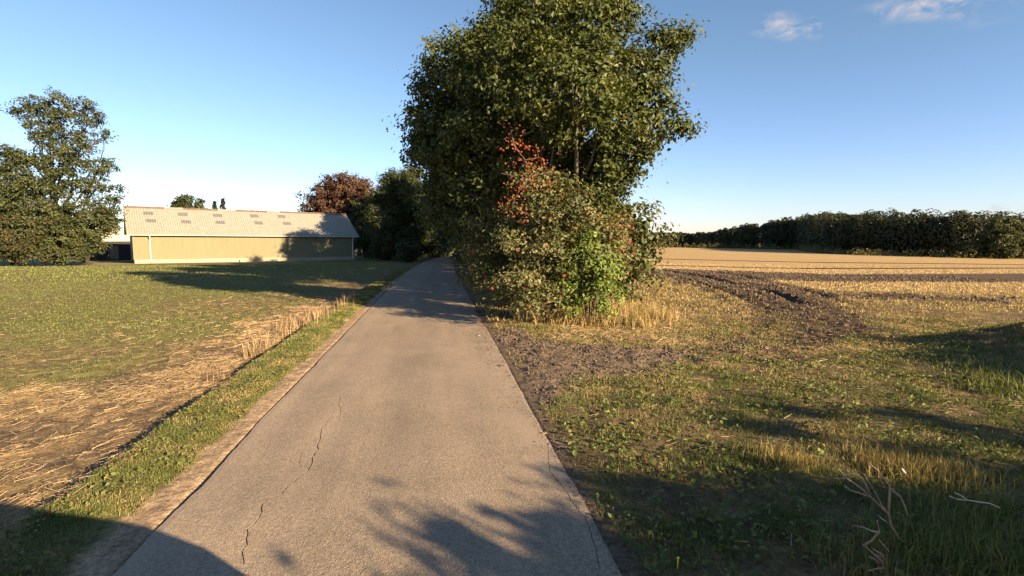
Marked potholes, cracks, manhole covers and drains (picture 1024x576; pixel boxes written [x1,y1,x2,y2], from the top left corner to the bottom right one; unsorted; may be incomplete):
crack [242,396,341,565]
